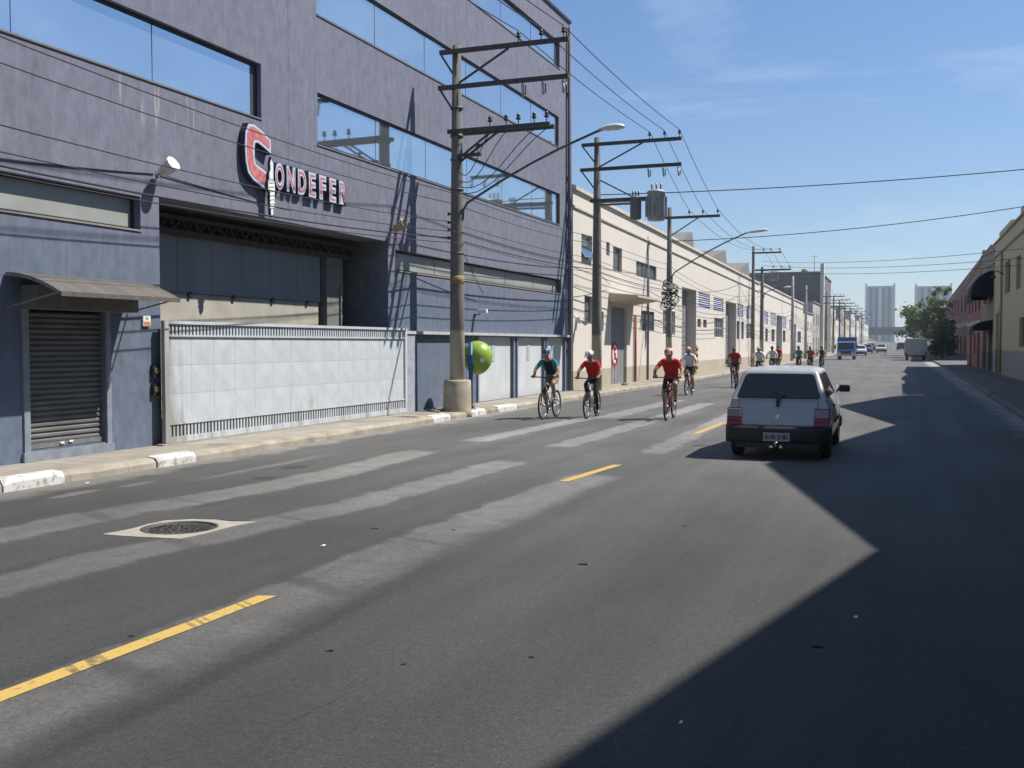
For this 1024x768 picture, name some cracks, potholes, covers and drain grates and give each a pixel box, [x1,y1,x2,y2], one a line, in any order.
manhole cover [103,519,257,539]
